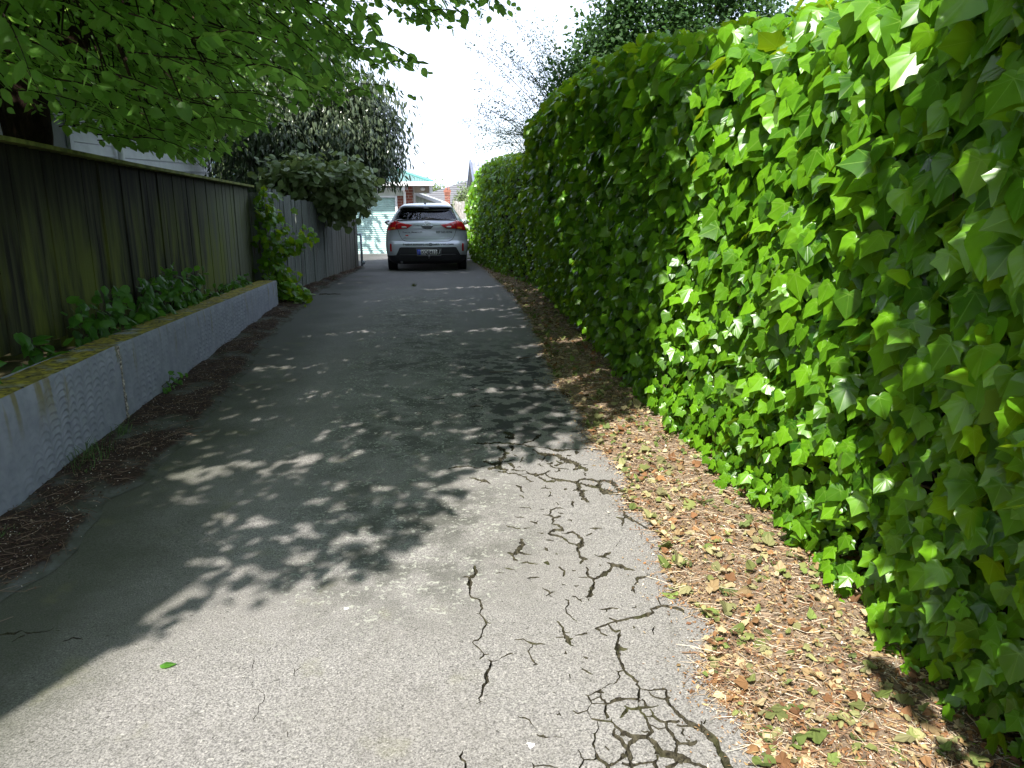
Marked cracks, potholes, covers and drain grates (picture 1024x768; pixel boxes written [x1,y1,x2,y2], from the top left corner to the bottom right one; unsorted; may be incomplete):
crack [448,431,733,768]
crack [0,628,83,642]
